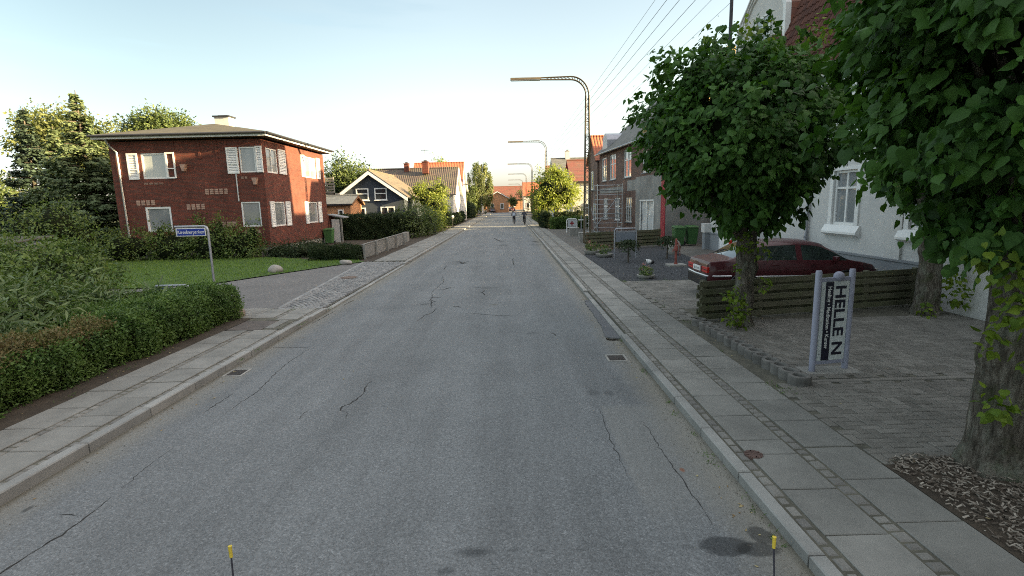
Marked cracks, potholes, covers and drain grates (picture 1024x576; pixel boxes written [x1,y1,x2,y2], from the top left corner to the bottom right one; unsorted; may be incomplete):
crack [0,455,163,574]
crack [643,424,712,523]
drain grate [221,369,252,377]
drain grate [605,354,629,362]
crack [417,261,507,321]
